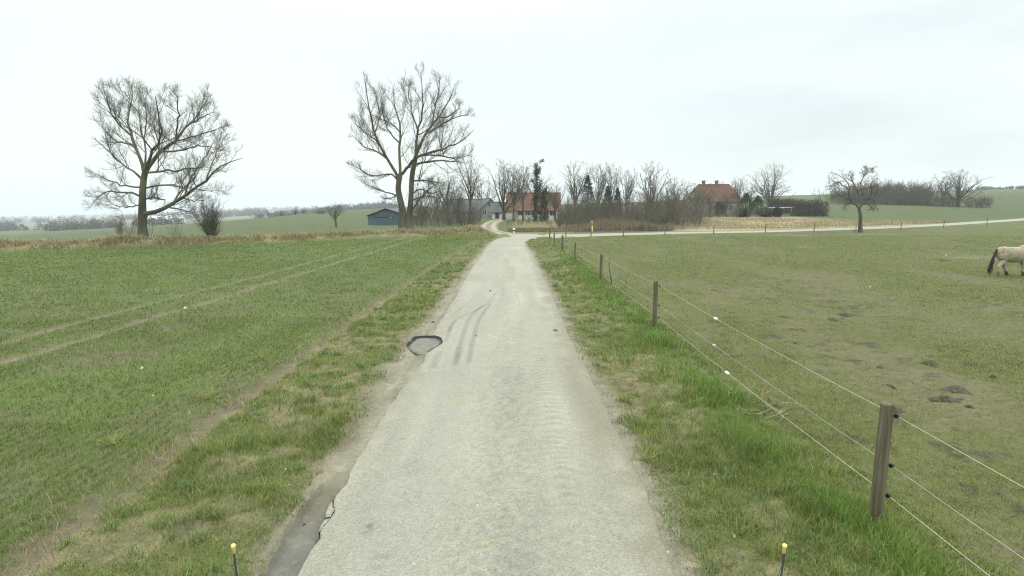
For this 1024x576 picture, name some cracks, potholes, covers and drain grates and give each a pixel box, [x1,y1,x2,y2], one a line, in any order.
pothole [407,335,443,355]
